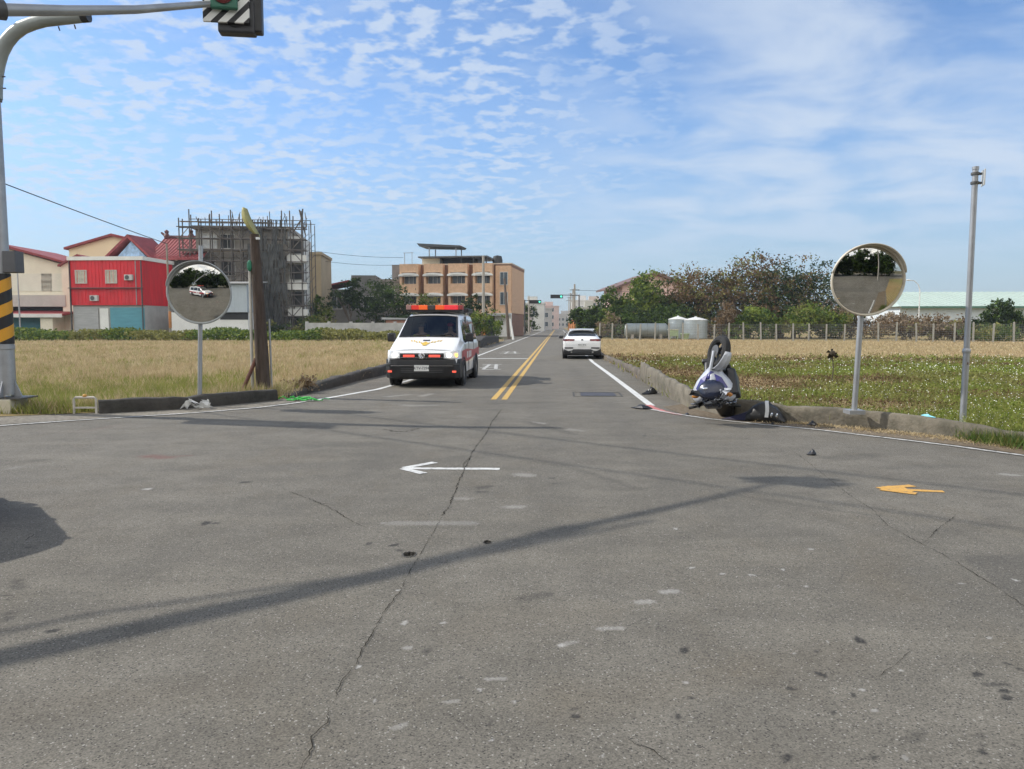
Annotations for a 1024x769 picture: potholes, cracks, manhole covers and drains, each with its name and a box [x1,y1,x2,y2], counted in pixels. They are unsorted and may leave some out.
crack [301,410,501,768]
